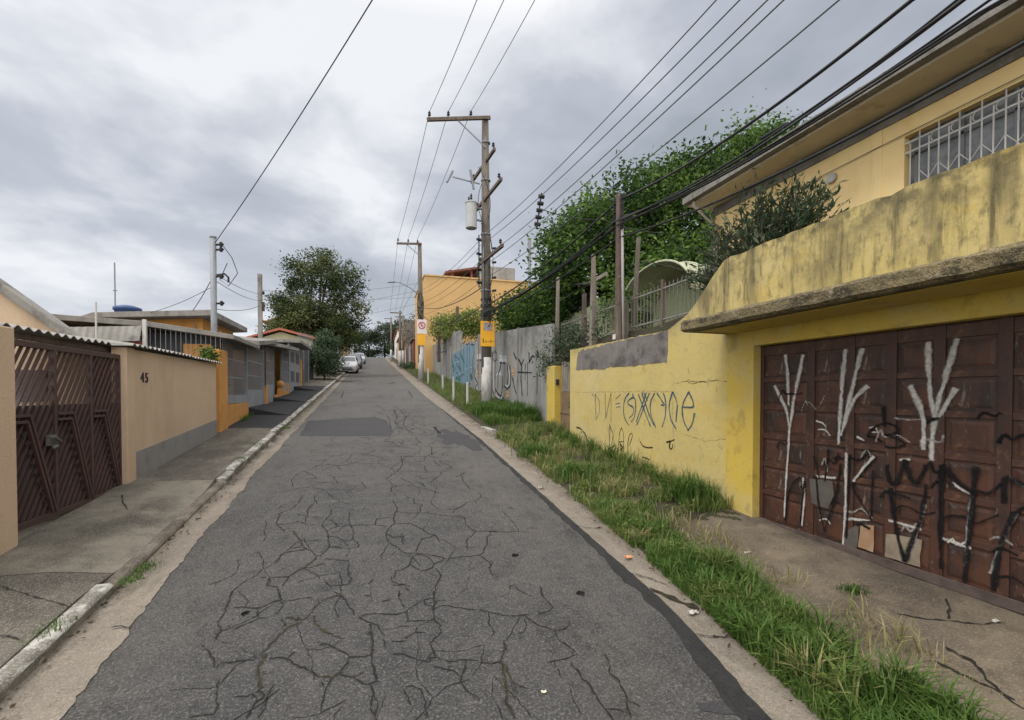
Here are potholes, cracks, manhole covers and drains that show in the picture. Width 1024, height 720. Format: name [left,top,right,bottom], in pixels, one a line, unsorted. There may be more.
crack [172,410,577,720]
crack [543,650,640,720]
crack [2,586,73,608]
crack [894,598,1006,624]
crack [376,382,519,533]
crack [935,646,1024,709]
